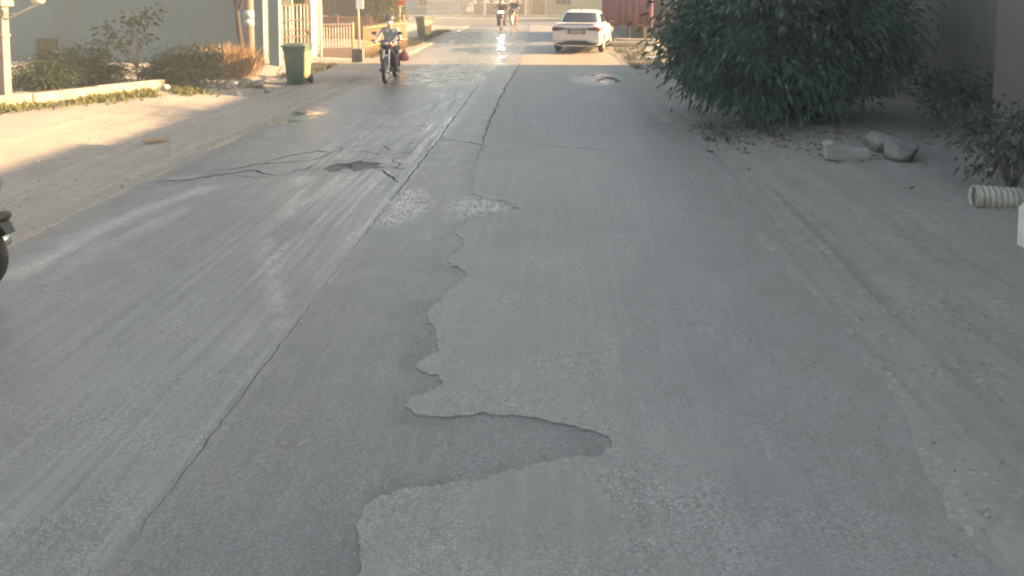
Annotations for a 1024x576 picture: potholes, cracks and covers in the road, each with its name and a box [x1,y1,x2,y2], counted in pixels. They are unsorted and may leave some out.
crack [138,66,518,537]
pothole [324,161,386,172]
